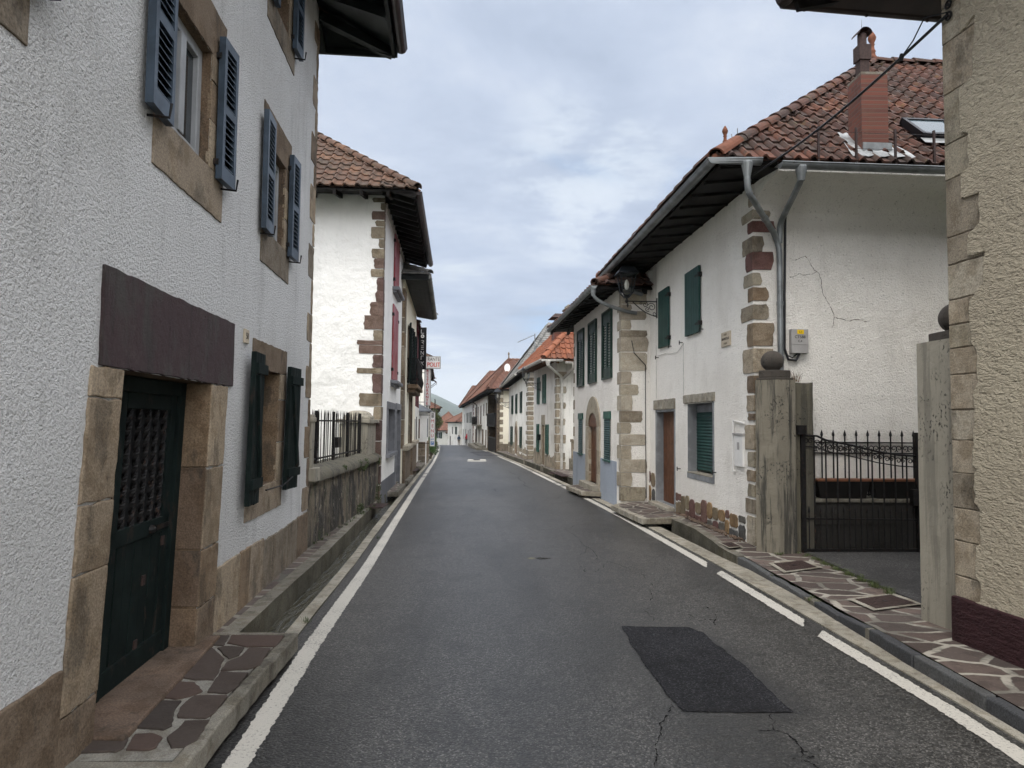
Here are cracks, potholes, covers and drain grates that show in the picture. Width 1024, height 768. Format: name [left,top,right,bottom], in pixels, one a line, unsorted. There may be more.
crack [654,702,673,767]
crack [760,714,821,768]
manhole cover [848,593,921,610]
manhole cover [769,560,822,573]
